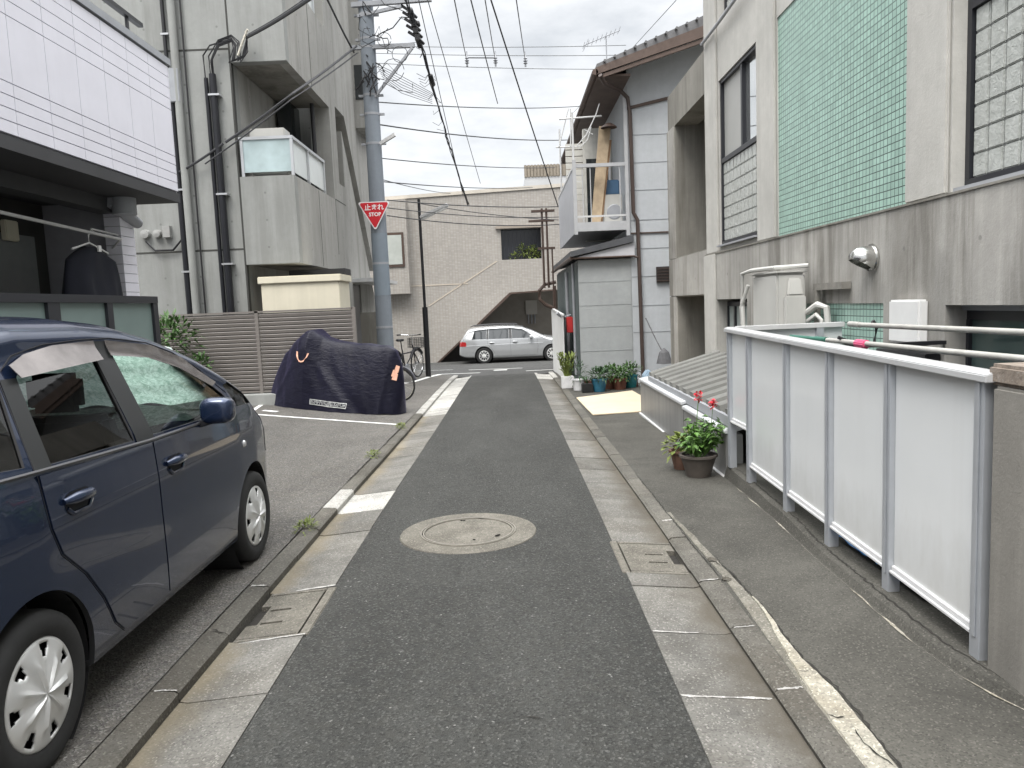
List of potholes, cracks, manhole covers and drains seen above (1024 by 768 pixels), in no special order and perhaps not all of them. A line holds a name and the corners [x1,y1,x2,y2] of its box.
manhole cover [400,513,536,554]
